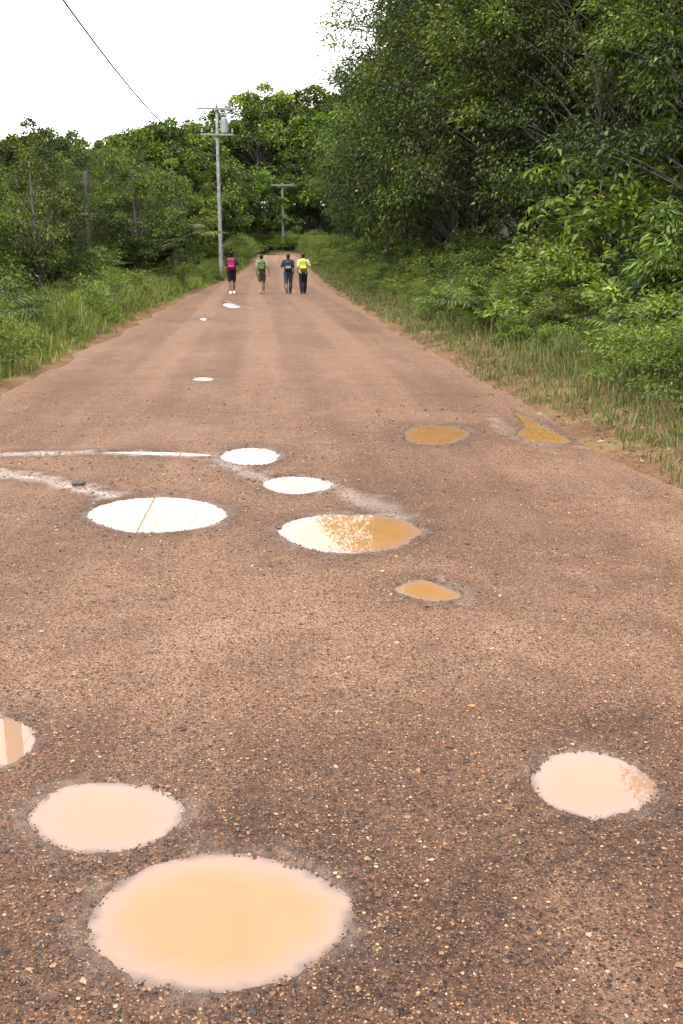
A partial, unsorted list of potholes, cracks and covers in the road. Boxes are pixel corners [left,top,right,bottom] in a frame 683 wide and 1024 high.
pothole [515,742,675,826]
pothole [77,494,235,534]
pothole [64,839,374,1010]
pothole [213,445,285,466]
pothole [9,772,203,863]
pothole [397,424,478,446]
pothole [385,575,471,604]
pothole [513,411,574,444]
pothole [0,709,49,770]
pothole [268,511,434,556]
pothole [255,474,343,495]
